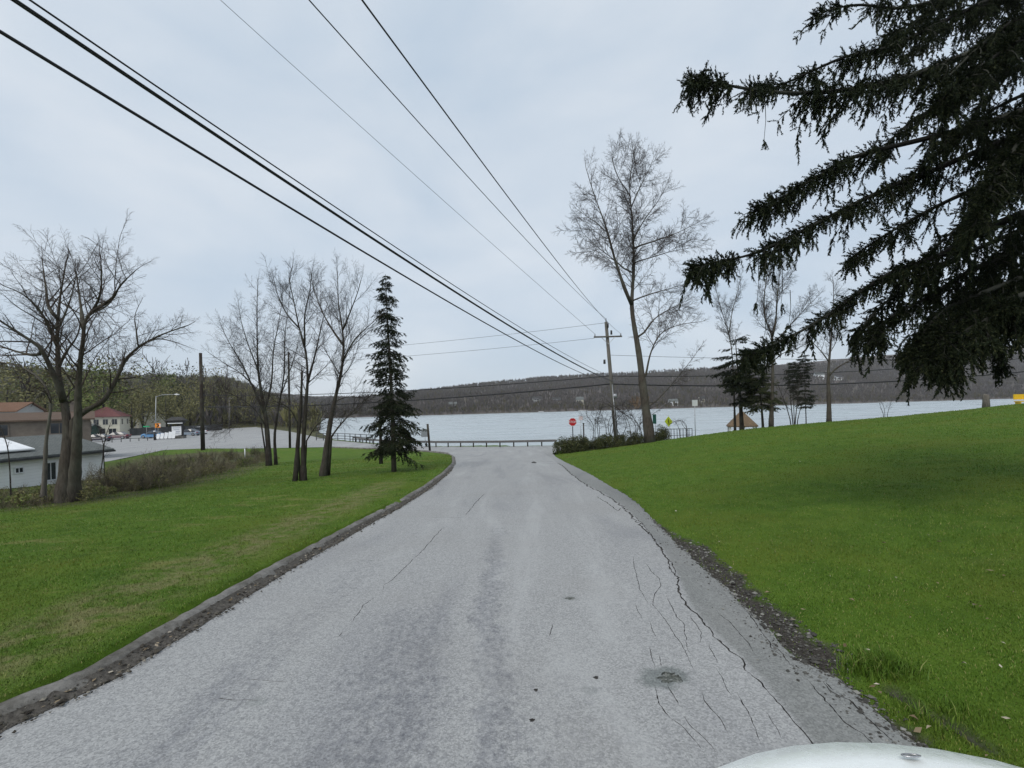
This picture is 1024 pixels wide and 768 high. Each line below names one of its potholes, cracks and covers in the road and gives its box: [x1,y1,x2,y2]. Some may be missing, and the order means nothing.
crack [338,495,483,637]
pothole [656,672,683,683]
crack [552,463,889,751]
